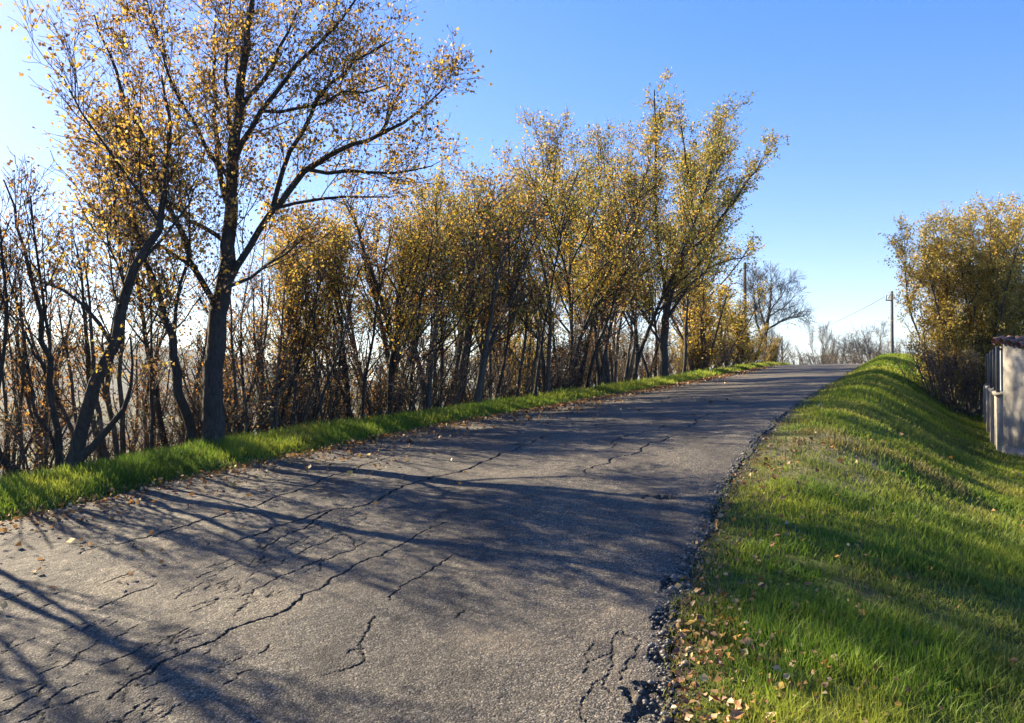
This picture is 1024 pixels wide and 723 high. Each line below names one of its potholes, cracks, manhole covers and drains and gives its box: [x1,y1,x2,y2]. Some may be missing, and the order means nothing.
crack [578,630,652,723]
crack [0,514,448,723]
